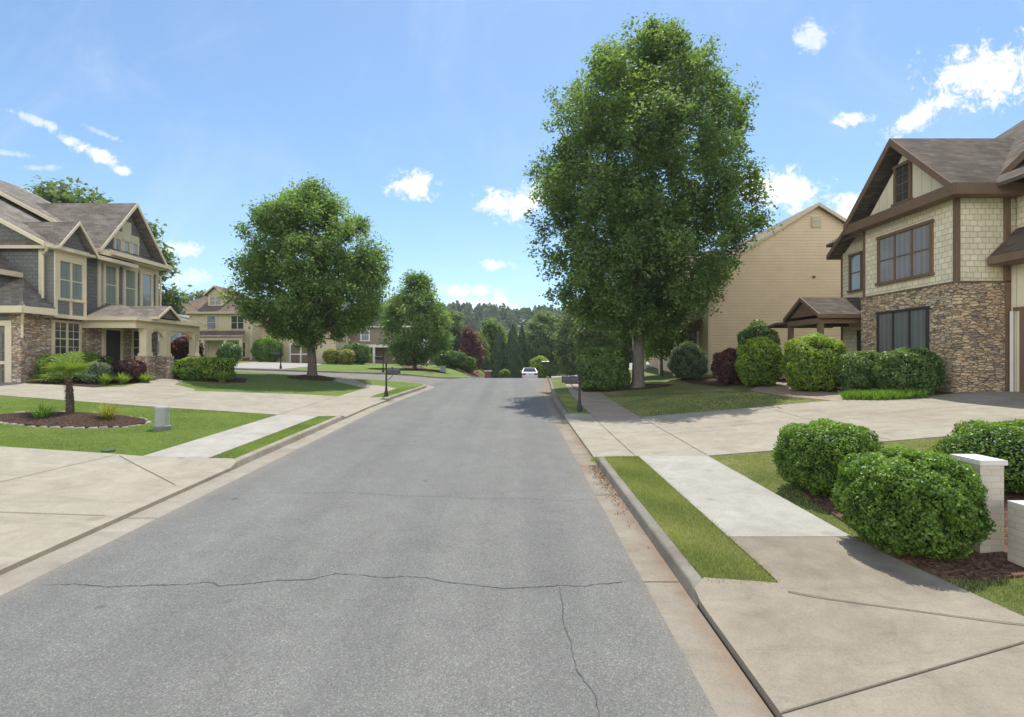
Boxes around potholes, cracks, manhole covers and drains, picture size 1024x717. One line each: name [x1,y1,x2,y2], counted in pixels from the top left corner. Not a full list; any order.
crack [51,573,630,717]
